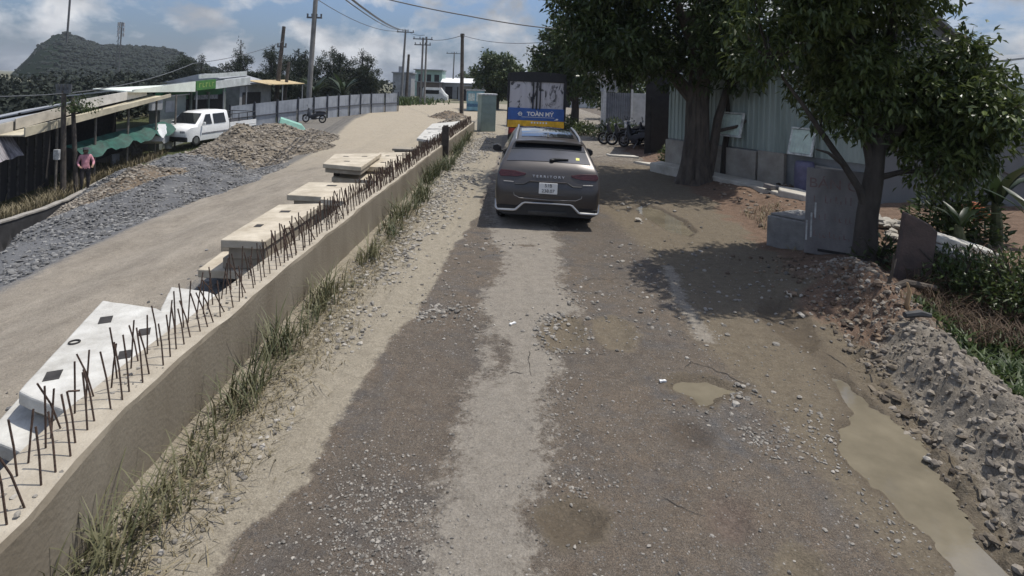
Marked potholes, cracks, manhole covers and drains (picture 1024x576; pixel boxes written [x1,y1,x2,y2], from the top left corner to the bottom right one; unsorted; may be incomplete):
pothole [593,316,637,351]
pothole [823,370,1009,576]
pothole [667,374,749,408]
